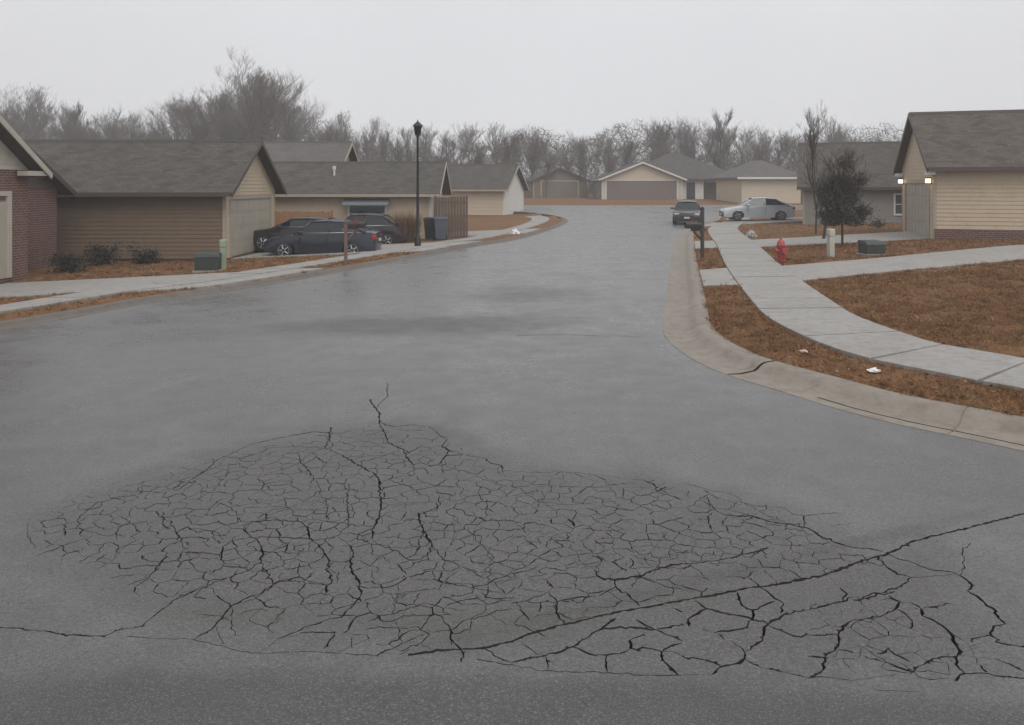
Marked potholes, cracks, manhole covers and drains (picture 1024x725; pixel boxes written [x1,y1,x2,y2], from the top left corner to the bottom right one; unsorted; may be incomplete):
crack [0,384,1024,692]
